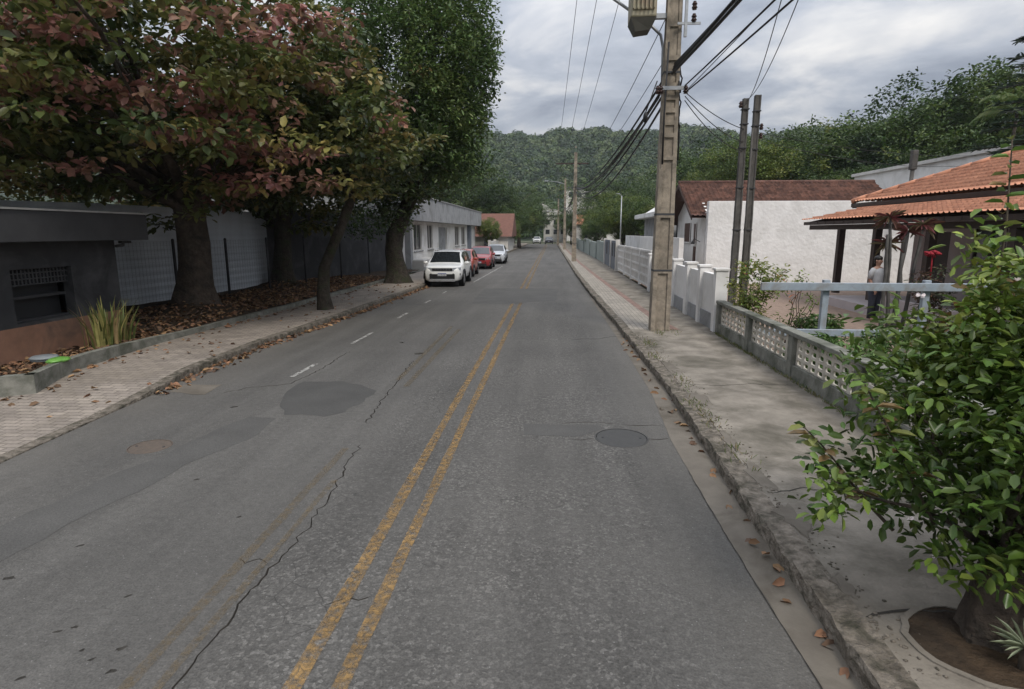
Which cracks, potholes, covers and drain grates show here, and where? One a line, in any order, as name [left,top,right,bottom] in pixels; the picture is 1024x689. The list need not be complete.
manhole cover [126,439,173,454]
crack [224,352,348,393]
crack [172,445,361,689]
crack [365,361,414,422]
manhole cover [595,428,649,448]
